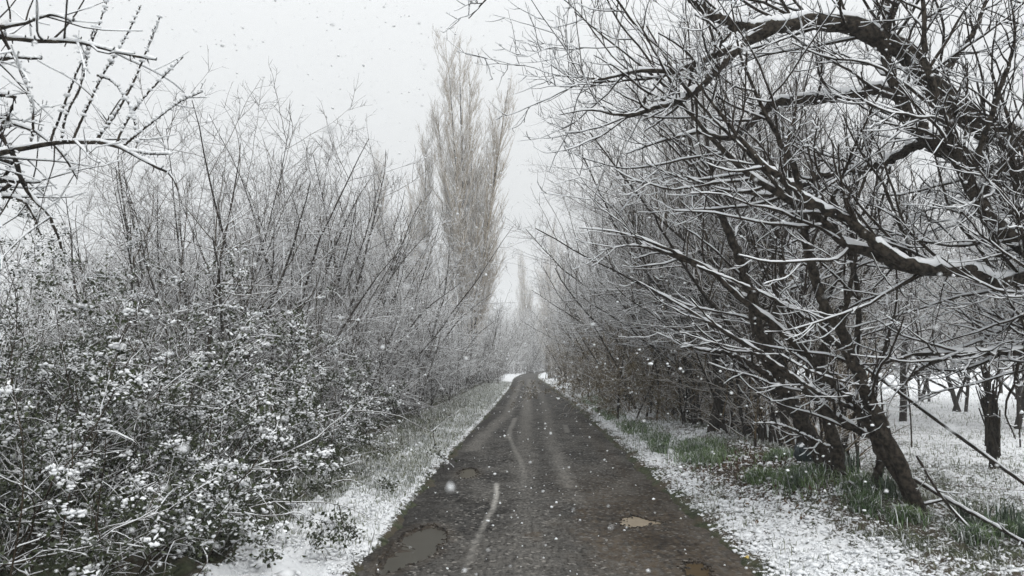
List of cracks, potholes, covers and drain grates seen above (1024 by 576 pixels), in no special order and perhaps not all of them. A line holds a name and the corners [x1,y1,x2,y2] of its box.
pothole [372,523,450,576]
pothole [677,558,716,576]
pothole [456,467,481,479]
